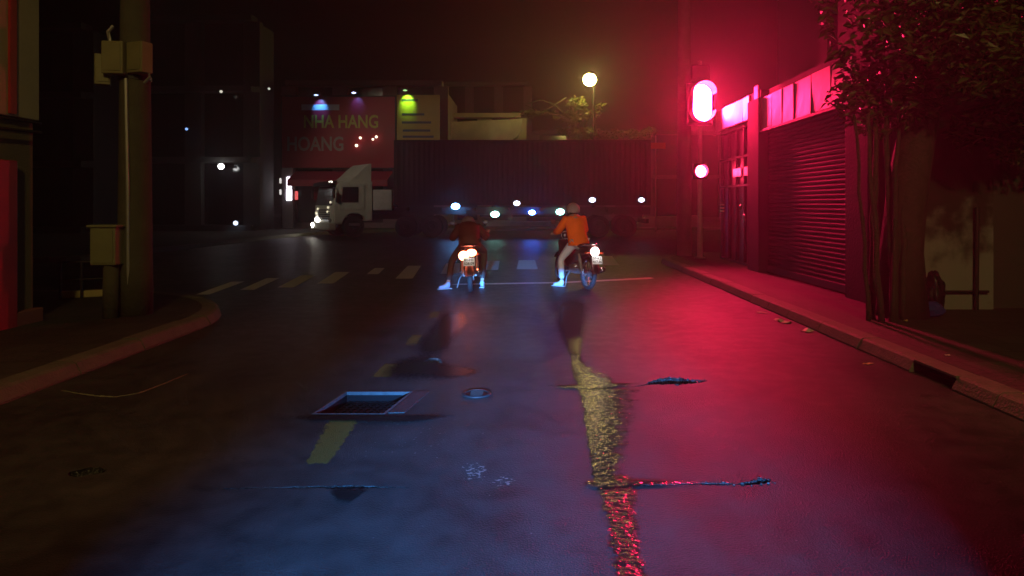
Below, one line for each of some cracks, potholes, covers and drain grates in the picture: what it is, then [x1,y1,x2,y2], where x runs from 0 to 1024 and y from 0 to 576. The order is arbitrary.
drain grate [914,359,979,382]
pothole [68,467,106,477]
manhole cover [462,389,491,398]
pothole [634,376,707,387]
crack [635,477,776,487]
crack [61,373,189,397]
